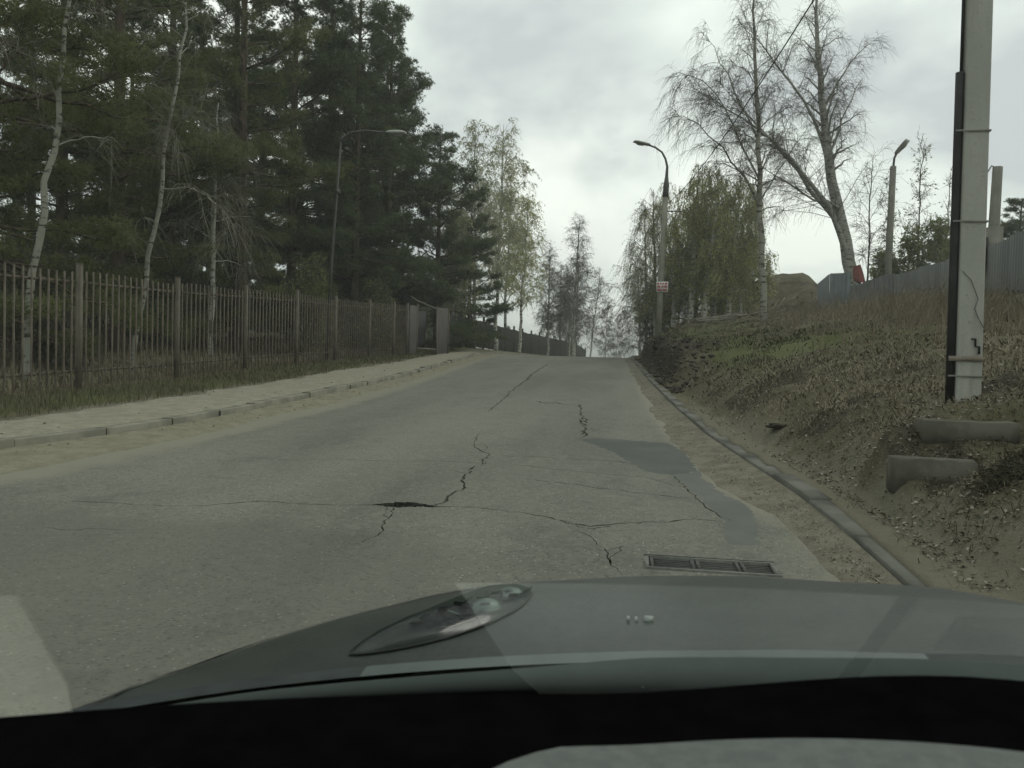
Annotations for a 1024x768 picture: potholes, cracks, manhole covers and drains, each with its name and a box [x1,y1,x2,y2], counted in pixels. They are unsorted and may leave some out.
crack [538,401,595,439]
drain grate [643,554,783,577]
crack [261,435,732,578]
